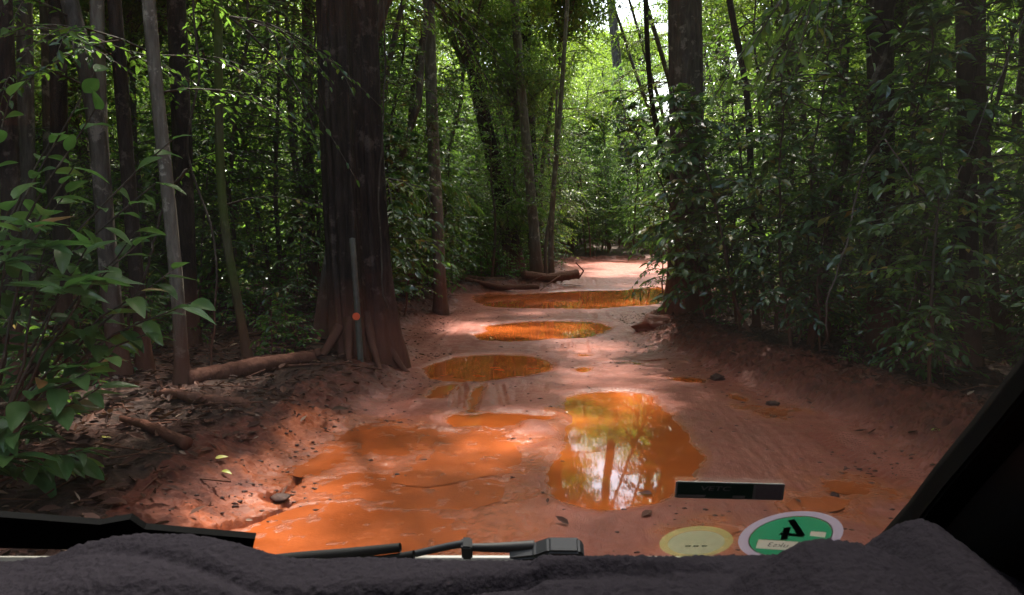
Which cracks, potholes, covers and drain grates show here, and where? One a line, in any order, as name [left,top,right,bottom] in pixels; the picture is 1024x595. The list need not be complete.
pothole [822,475,903,498]
pothole [245,499,477,556]
pothole [444,409,558,431]
pothole [541,388,712,512]
pothole [471,286,665,309]
pothole [470,319,614,342]
pothole [740,405,798,418]
pothole [392,425,537,487]
pothole [726,392,752,402]
pothole [305,465,519,514]
pothole [778,492,854,517]
